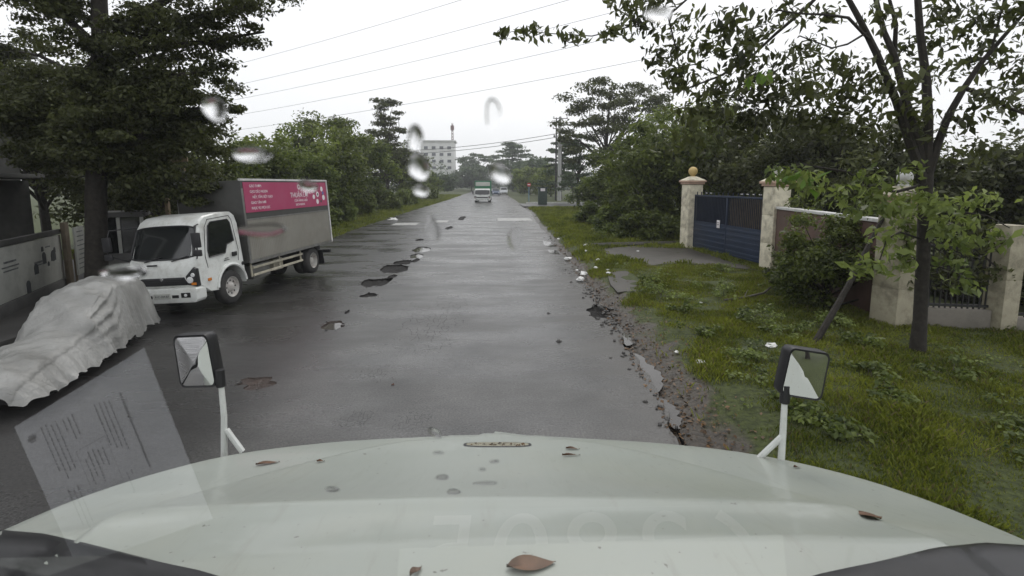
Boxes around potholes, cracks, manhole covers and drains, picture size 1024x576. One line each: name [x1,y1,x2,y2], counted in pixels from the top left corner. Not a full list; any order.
pothole [586,304,612,319]
pothole [321,321,345,331]
pothole [235,377,277,390]
pothole [380,264,409,273]
pothole [358,278,392,287]
